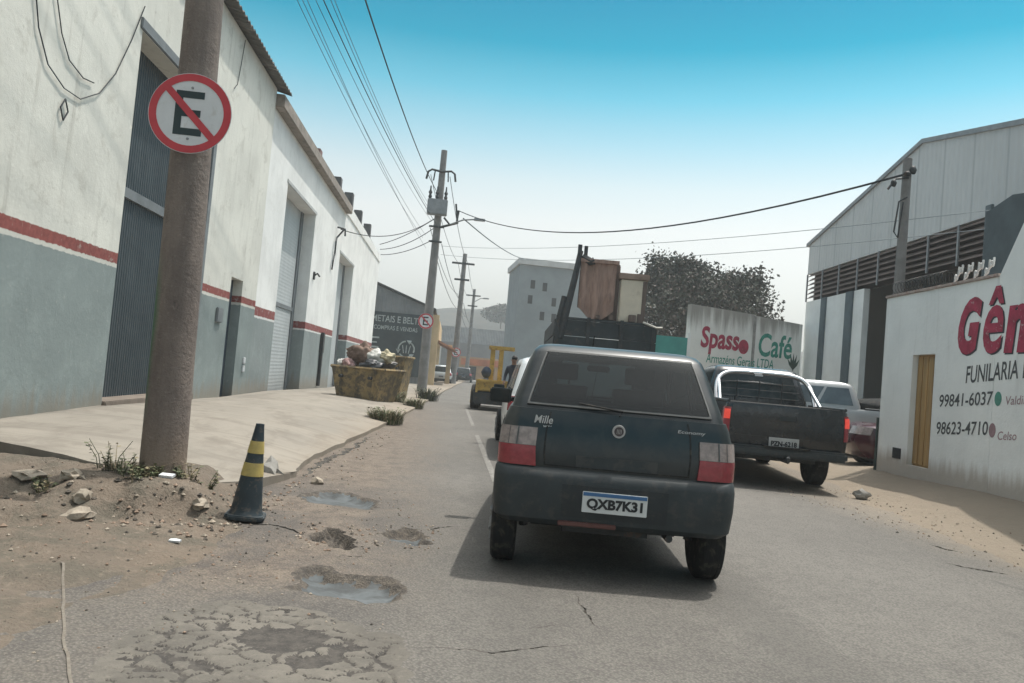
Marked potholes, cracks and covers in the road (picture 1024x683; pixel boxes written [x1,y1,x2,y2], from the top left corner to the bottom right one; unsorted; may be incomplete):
pothole [281,565,408,606]
pothole [308,527,357,550]
pothole [298,490,380,510]
pothole [380,526,433,546]
crack [930,544,1007,575]
crack [575,594,600,629]
crack [89,600,568,683]
